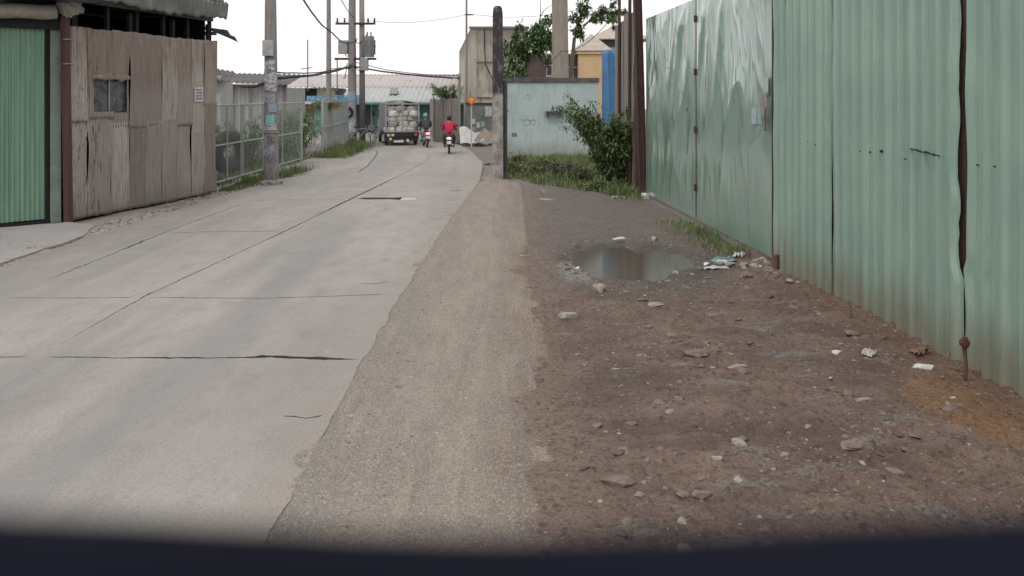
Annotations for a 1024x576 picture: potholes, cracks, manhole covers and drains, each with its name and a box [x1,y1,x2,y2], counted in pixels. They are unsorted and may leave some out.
pothole [564,243,704,282]
